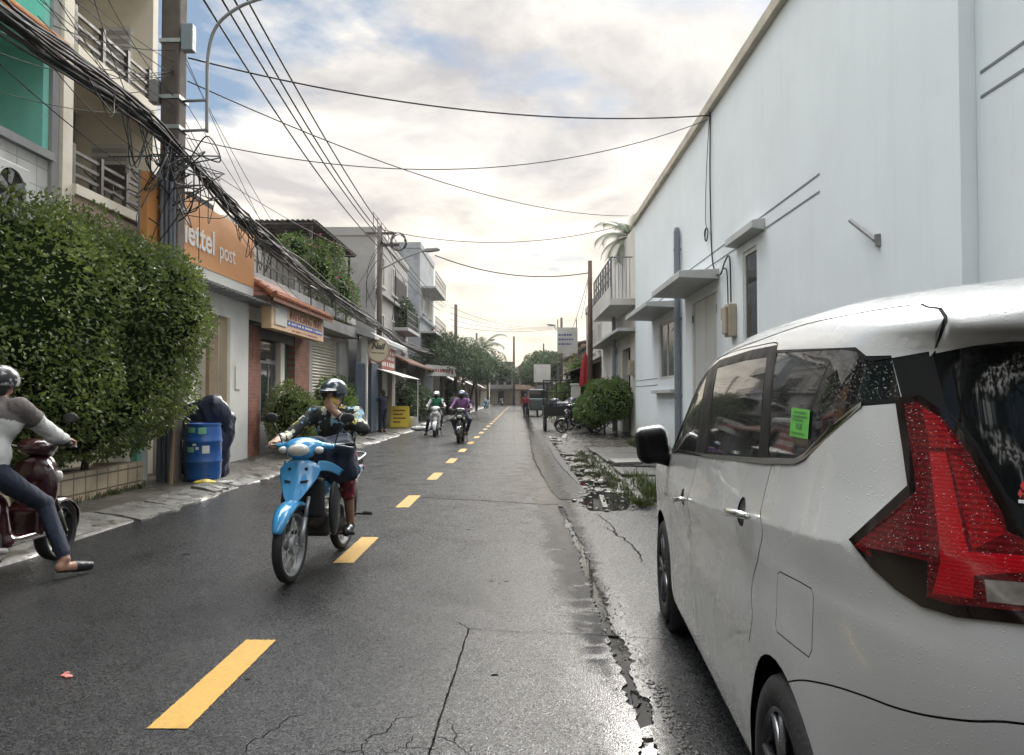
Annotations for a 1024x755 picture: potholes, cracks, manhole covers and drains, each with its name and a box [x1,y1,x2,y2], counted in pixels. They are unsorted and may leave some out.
pothole [582,491,630,512]
crack [410,431,644,707]
crack [243,707,312,755]
crack [322,705,473,755]
pothole [638,738,659,755]
pothole [630,690,654,729]
